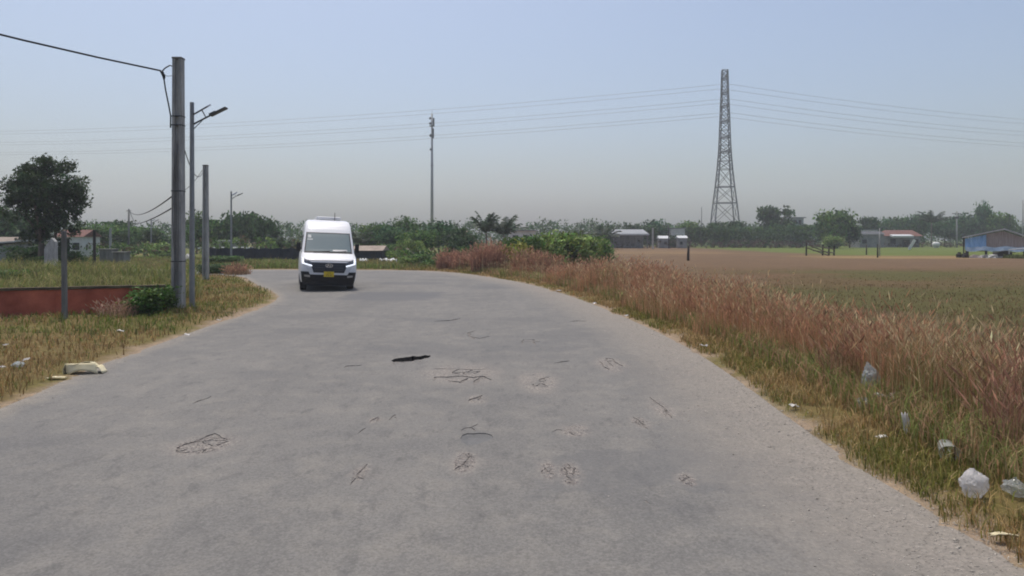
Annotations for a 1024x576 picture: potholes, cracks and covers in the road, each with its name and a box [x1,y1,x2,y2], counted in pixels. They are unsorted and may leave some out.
pothole [391,355,430,365]
crack [541,462,579,485]
crack [350,464,367,485]
crack [523,361,567,390]
crack [679,474,696,486]
crack [176,433,230,454]
crack [631,397,672,429]
crack [454,452,476,472]
crack [433,367,493,402]
crack [600,358,624,370]
